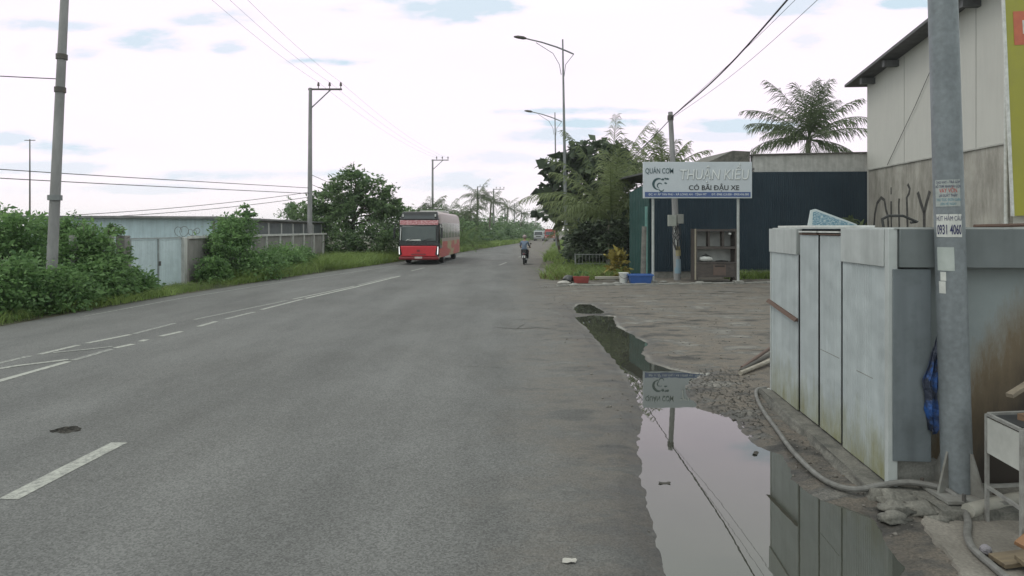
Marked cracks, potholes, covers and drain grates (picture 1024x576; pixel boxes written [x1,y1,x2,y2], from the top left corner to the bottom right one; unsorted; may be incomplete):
pothole [50,426,82,434]
